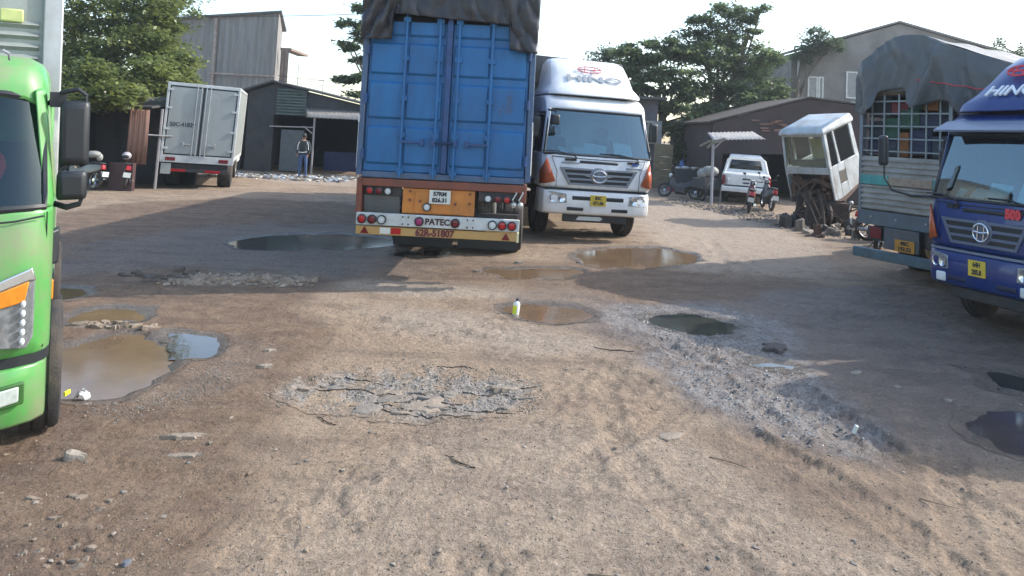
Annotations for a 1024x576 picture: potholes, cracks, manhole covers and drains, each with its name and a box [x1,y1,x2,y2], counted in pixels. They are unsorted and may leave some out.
pothole [220,231,393,251]
pothole [150,327,236,363]
pothole [61,327,190,407]
crack [314,377,537,425]
pothole [495,299,604,325]
pothole [60,284,102,301]
pothole [638,306,753,338]
pothole [567,245,706,270]
pothole [63,303,160,326]
pothole [470,265,590,280]
pothole [948,402,1024,460]
